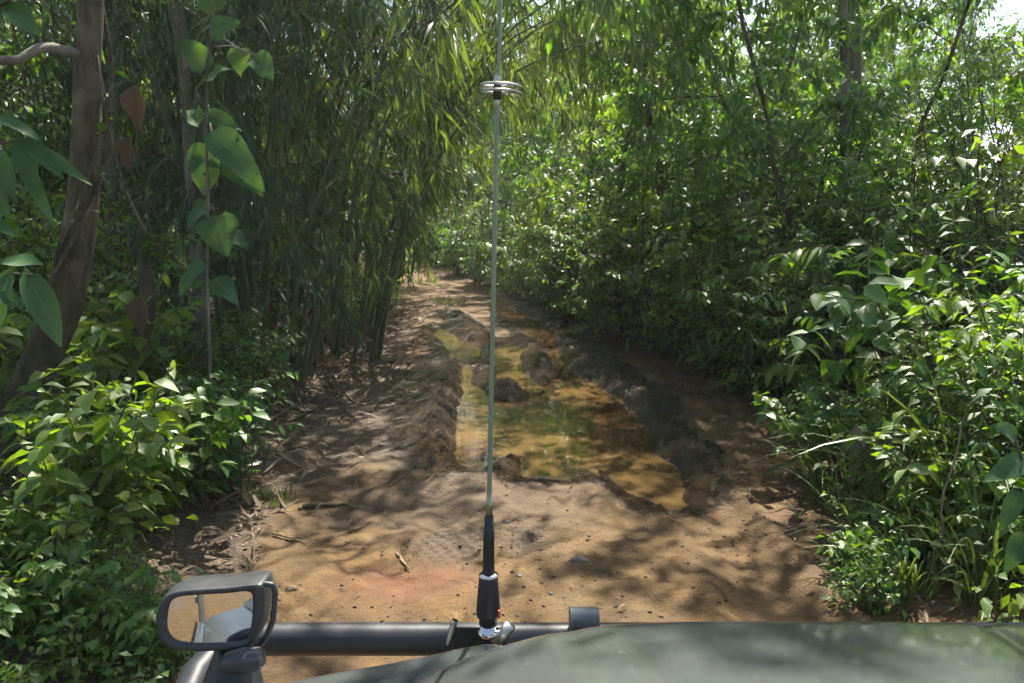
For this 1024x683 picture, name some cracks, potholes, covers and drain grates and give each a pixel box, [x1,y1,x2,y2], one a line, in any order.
pothole [485,335,546,400]
pothole [495,301,579,374]
pothole [431,360,712,515]
